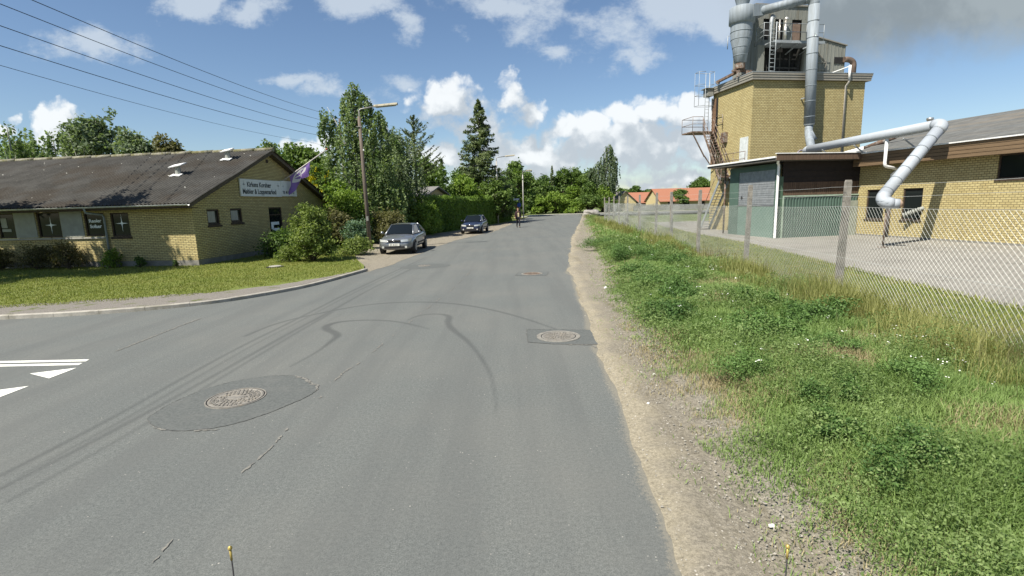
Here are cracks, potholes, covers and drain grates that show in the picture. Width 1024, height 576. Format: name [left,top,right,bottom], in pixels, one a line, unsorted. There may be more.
manhole cover [204,388,267,409]
manhole cover [537,330,580,342]
